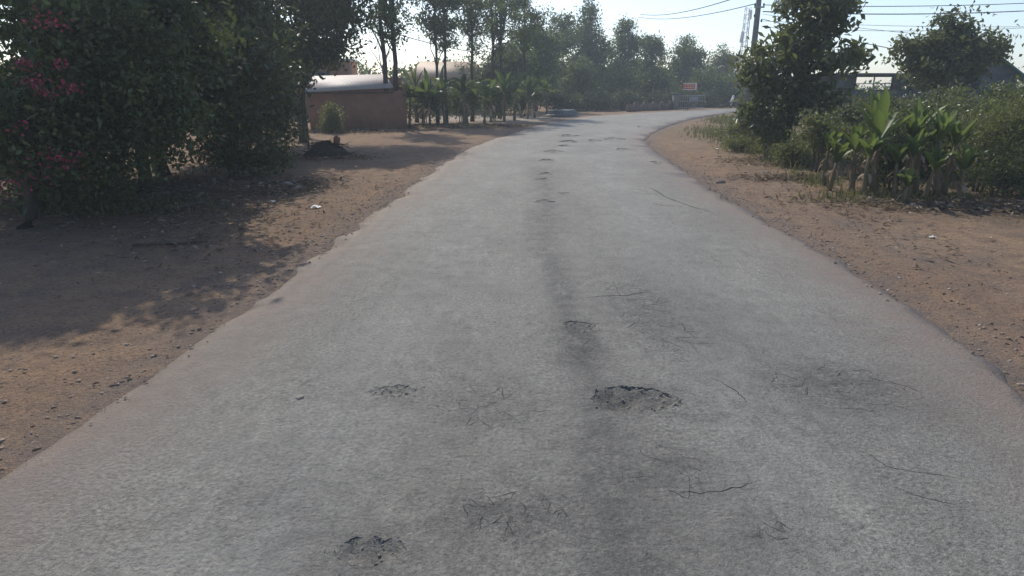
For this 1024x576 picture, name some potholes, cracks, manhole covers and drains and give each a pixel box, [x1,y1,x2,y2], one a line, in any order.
pothole [590,385,684,413]
pothole [368,384,425,398]
pothole [324,534,407,566]
crack [435,385,549,430]
crack [586,284,717,355]
crack [622,444,749,498]
crack [772,362,917,412]
pothole [560,320,600,333]
